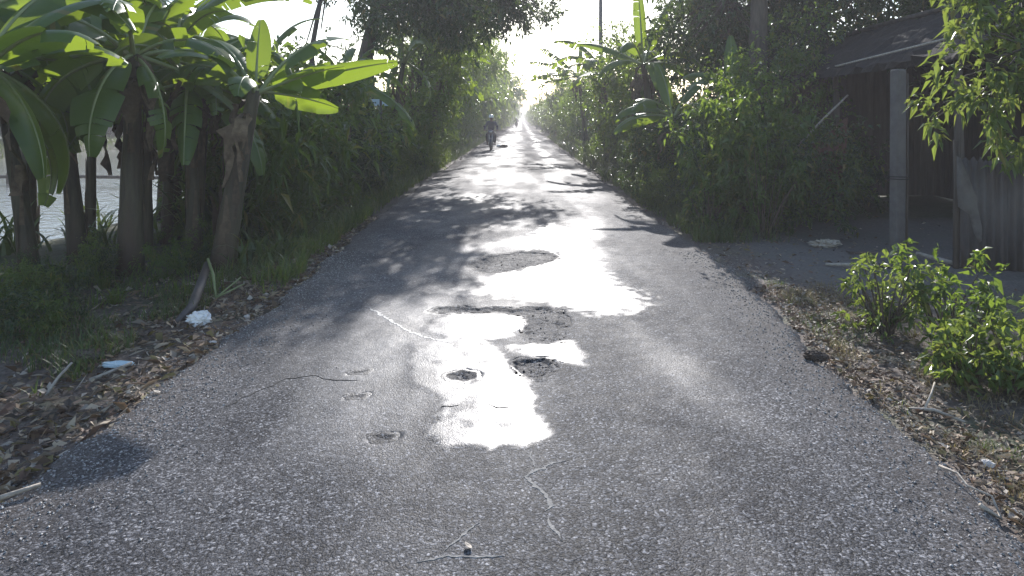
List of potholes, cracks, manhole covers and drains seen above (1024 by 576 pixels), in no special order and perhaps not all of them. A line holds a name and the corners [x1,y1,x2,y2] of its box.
pothole [426,305,575,346]
crack [225,375,355,407]
crack [524,451,566,541]
pothole [342,392,372,400]
crack [369,308,449,343]
pothole [366,432,400,445]
pothole [505,356,567,382]
pothole [440,368,481,384]
pothole [466,250,567,274]
